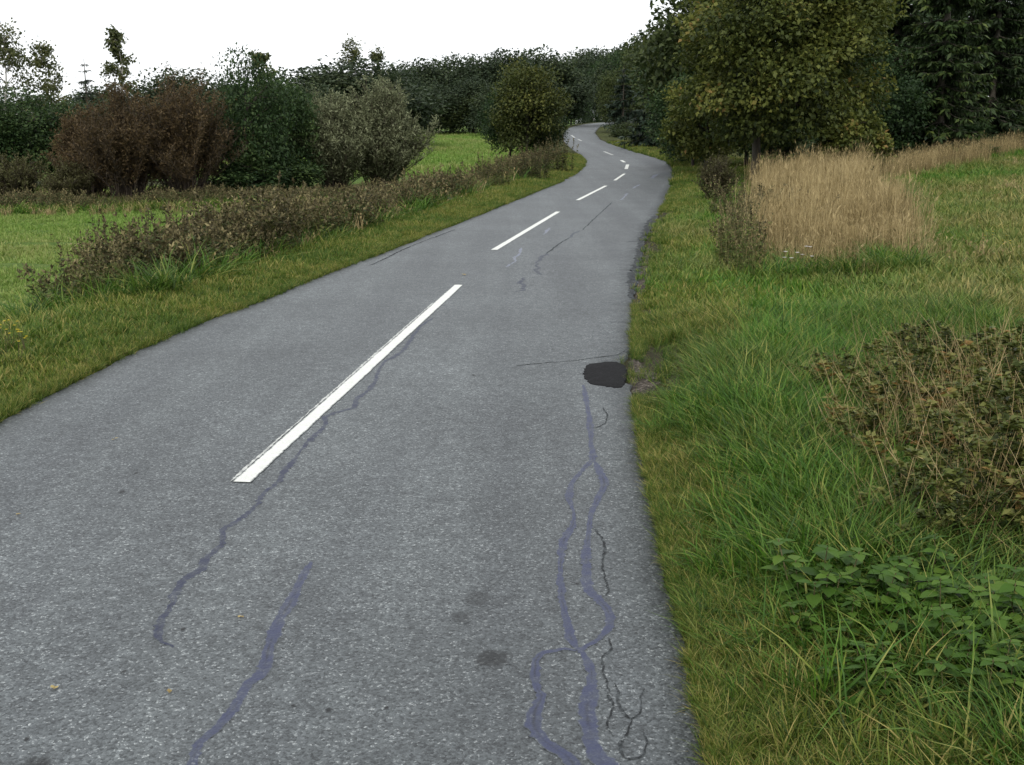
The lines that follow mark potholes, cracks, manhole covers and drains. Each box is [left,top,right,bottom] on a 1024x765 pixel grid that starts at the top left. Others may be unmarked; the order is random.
crack [594,527,610,595]
crack [601,638,648,759]
crack [514,174,658,298]
